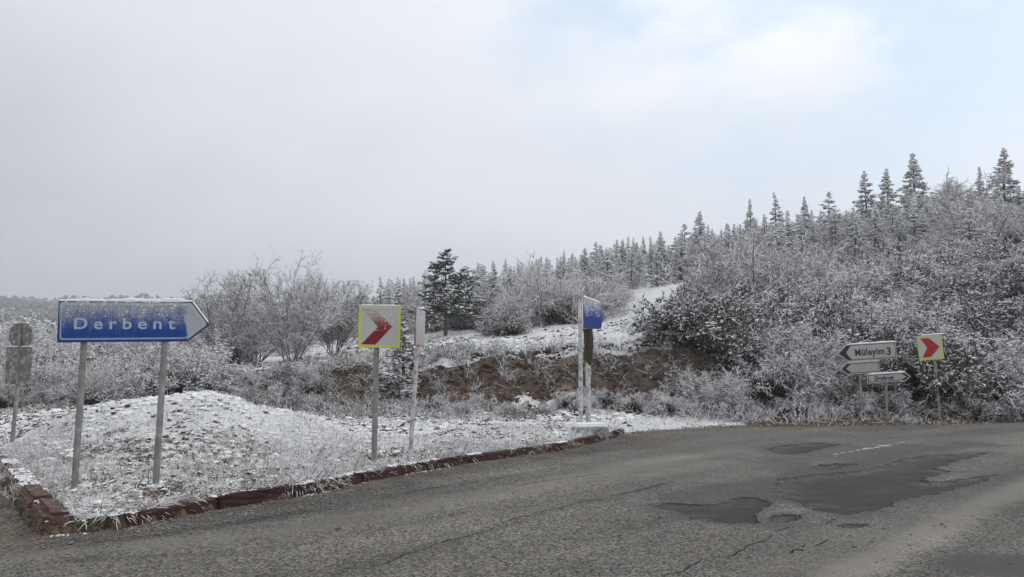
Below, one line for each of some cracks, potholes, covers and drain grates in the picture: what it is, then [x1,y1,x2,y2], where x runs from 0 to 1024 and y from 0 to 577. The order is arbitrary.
crack [662,518,837,577]
